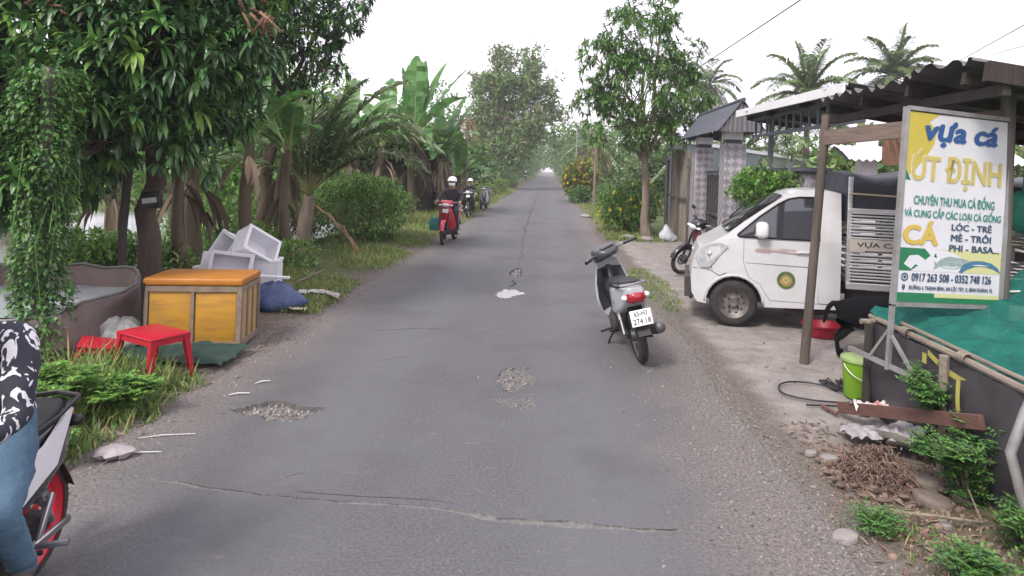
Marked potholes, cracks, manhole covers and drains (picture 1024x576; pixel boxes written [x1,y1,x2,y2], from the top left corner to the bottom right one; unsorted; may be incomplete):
pothole [229,400,326,422]
pothole [495,367,537,394]
pothole [509,268,522,278]
crack [131,472,685,532]
